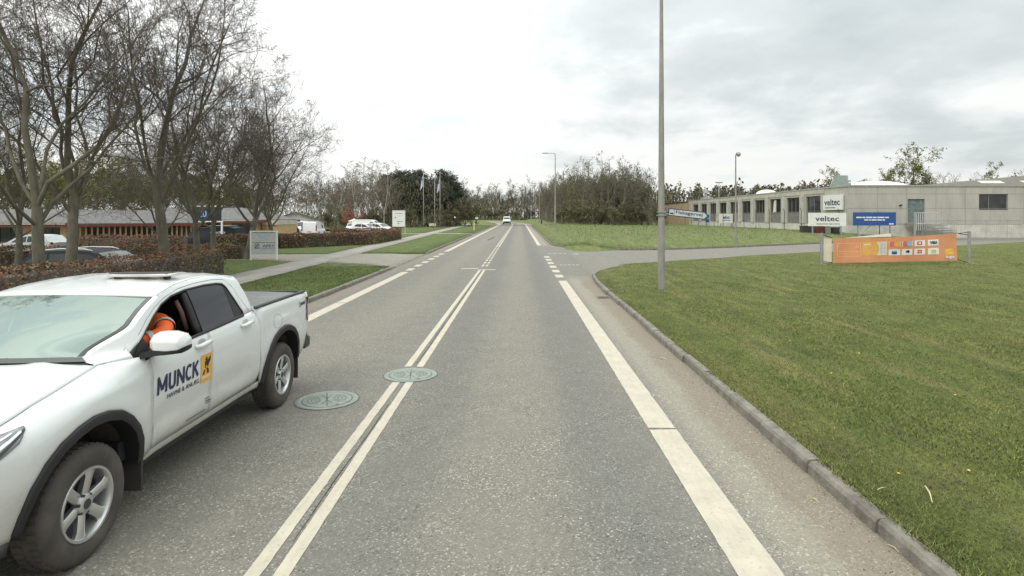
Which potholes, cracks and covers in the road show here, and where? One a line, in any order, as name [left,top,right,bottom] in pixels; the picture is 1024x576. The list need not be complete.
manhole cover [383,368,438,382]
manhole cover [293,390,360,410]
